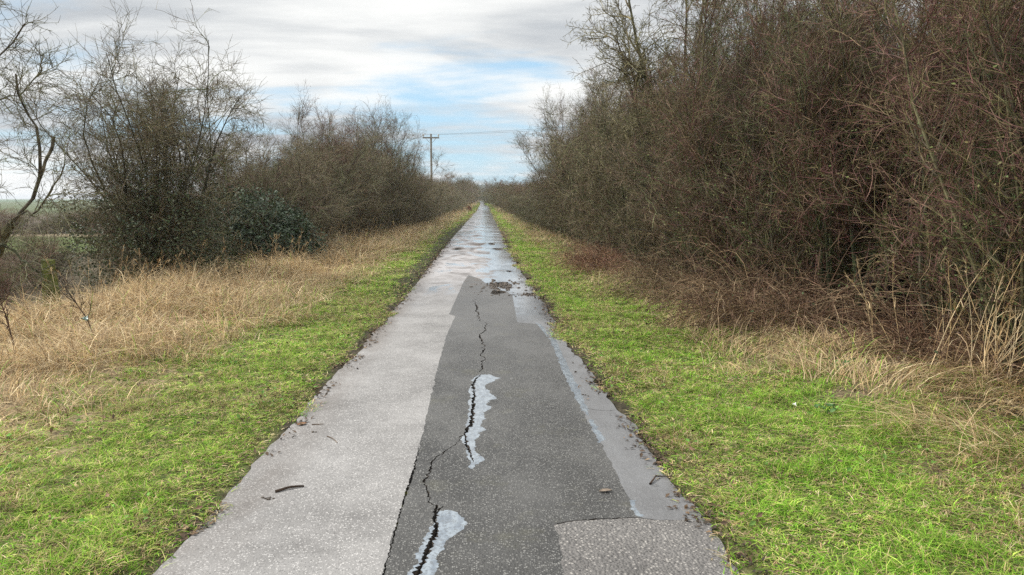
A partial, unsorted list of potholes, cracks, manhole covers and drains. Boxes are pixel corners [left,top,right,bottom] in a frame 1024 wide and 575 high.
crack [412,301,487,575]
